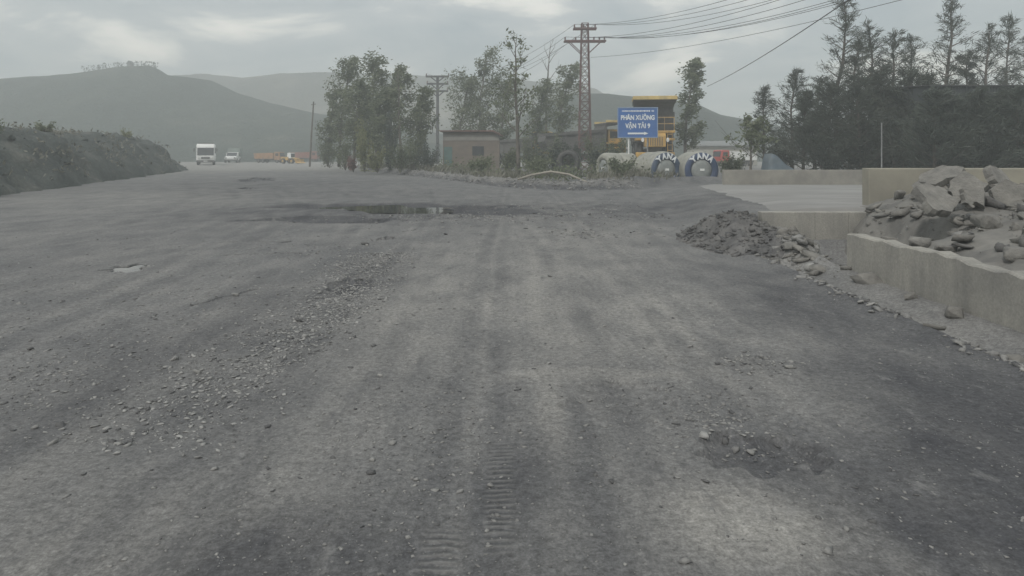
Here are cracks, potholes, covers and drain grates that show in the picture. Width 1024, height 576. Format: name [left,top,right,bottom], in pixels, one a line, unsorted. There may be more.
pothole [322,276,377,298]
pothole [94,262,152,273]
pothole [687,427,842,482]
pothole [249,202,561,216]
